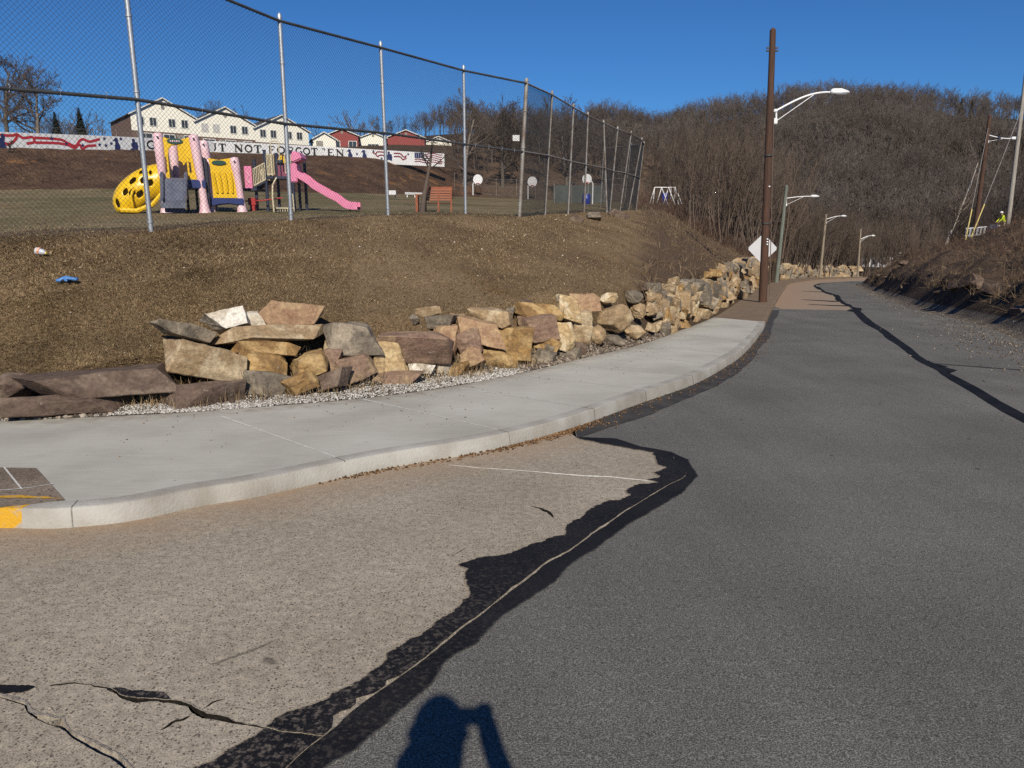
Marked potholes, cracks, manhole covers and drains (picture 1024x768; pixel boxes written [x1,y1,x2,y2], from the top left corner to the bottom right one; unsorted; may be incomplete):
crack [0,681,314,768]
